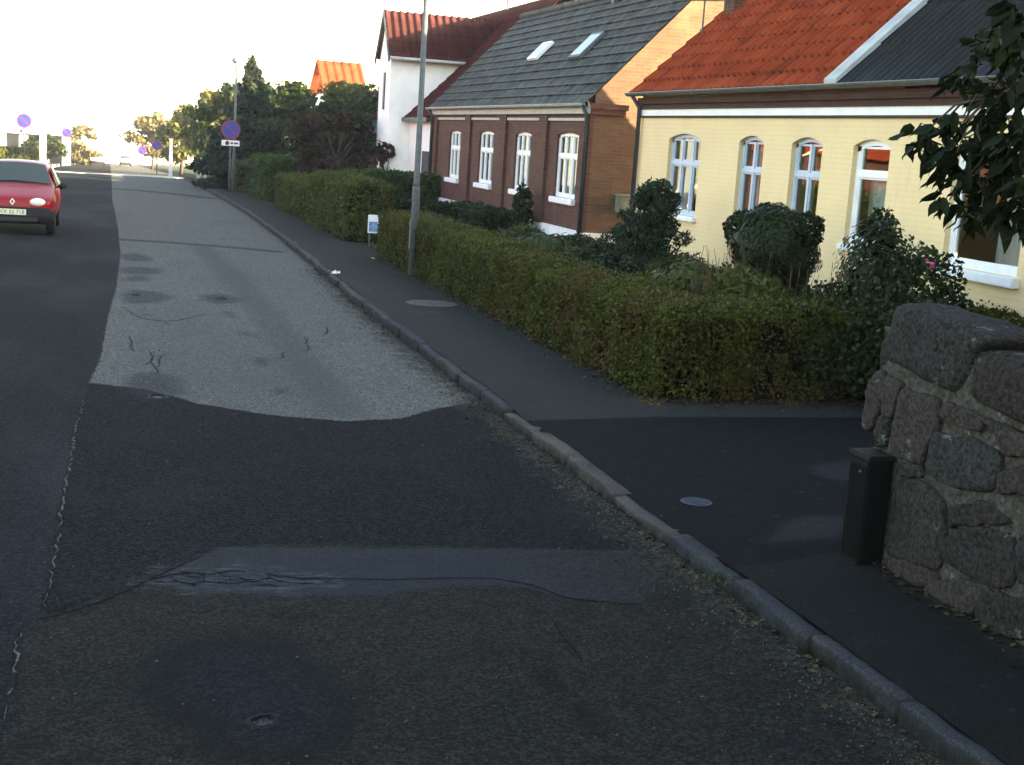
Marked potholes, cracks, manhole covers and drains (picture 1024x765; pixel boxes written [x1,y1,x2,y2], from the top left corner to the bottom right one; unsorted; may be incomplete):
pothole [245,713,279,729]
crack [151,569,640,605]
crack [124,308,205,373]
manhole cover [680,497,712,506]
crack [547,613,584,665]
